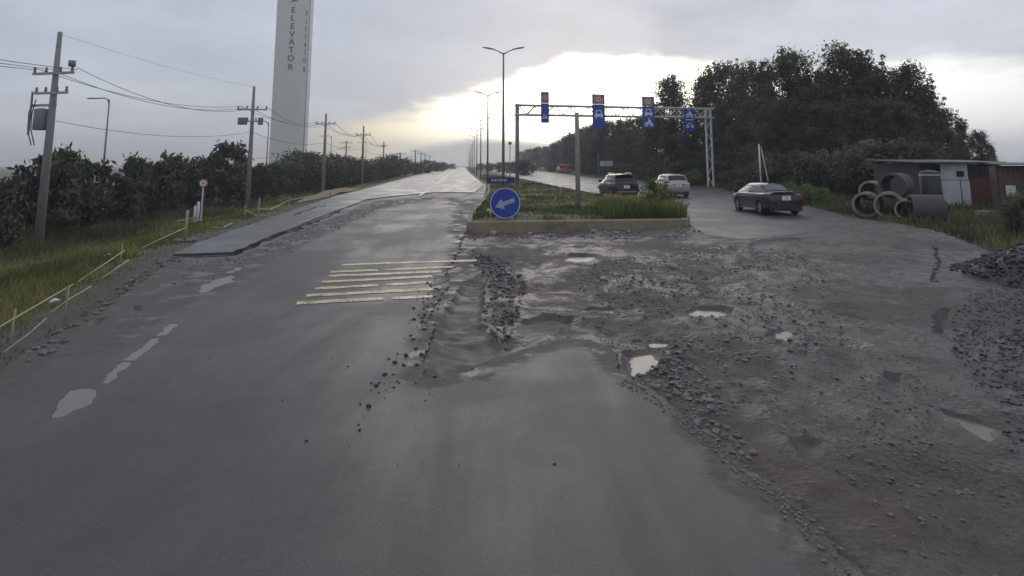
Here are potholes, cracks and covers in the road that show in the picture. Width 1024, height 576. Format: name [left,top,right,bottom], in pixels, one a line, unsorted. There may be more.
pothole [620,350,666,376]
pothole [766,328,795,341]
pothole [560,252,603,263]
pothole [929,307,955,336]
pothole [938,407,1001,442]
pothole [682,305,735,318]
pothole [876,370,908,390]
crack [930,246,942,282]
pothole [428,276,507,378]
